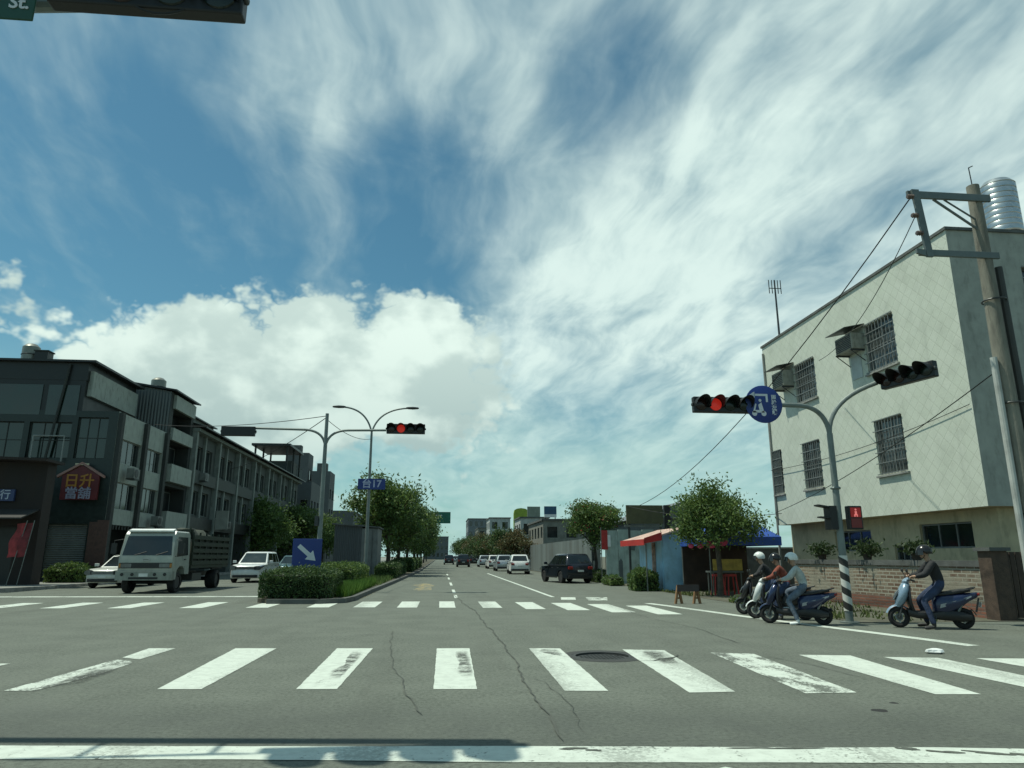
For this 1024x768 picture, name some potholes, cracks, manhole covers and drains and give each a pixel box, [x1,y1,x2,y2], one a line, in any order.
crack [455,596,582,740]
crack [278,631,426,714]
manhole cover [566,650,638,662]
